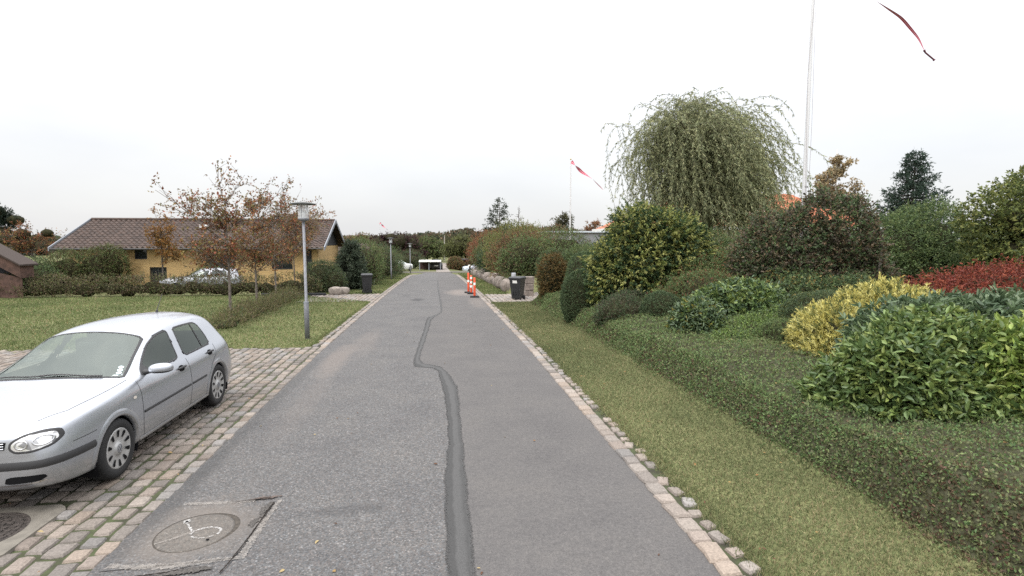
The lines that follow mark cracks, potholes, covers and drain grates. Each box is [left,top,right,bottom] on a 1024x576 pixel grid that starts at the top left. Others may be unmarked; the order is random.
manhole cover [152,513,241,553]
